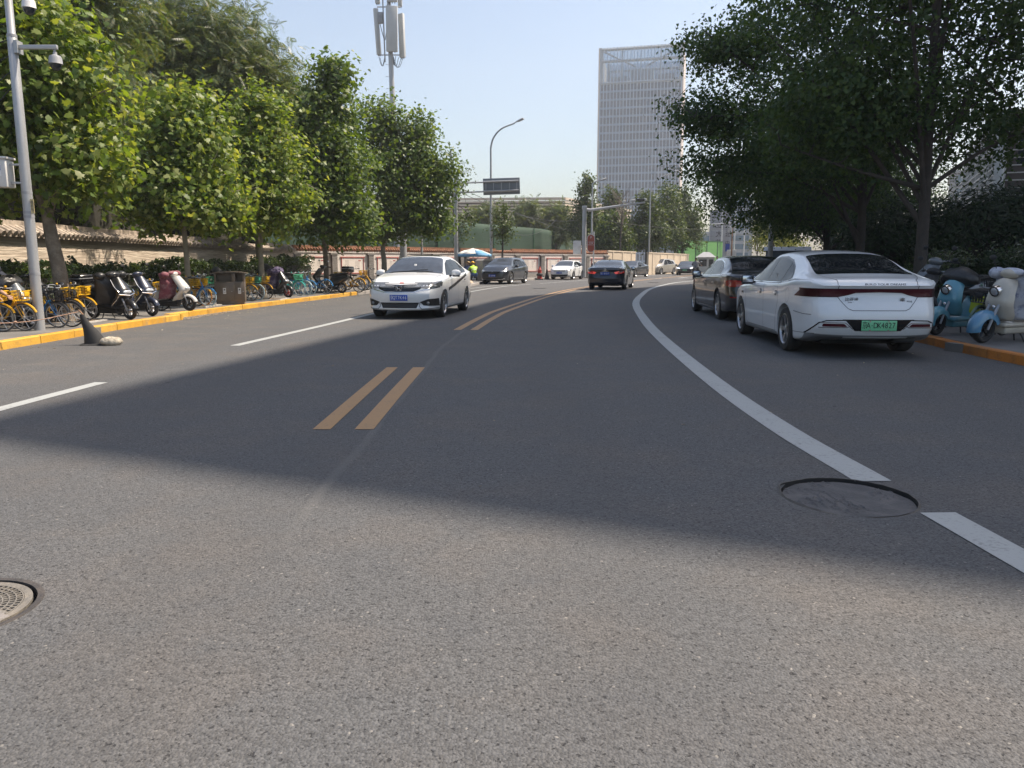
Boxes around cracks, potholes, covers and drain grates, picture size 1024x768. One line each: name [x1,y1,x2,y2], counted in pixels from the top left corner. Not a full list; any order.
manhole cover [0,578,45,626]
manhole cover [778,477,921,518]
